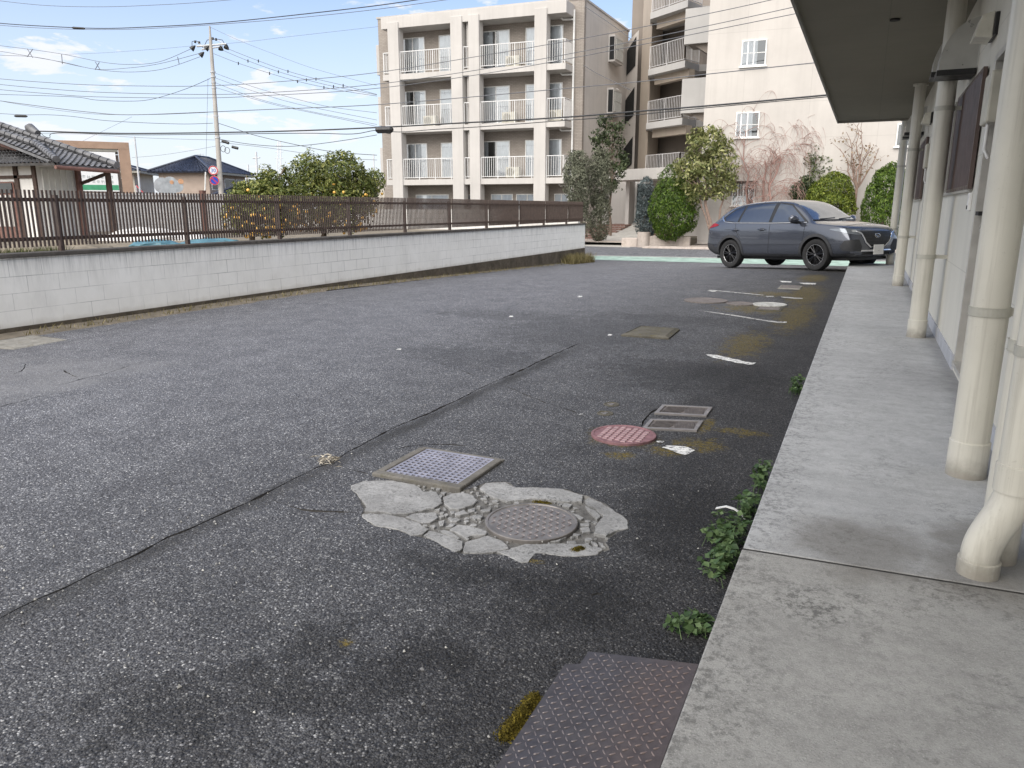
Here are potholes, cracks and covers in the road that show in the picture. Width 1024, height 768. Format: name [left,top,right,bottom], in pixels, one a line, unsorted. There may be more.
drain grate [372,447,505,493]
manhole cover [485,503,578,545]
manhole cover [591,425,656,446]
